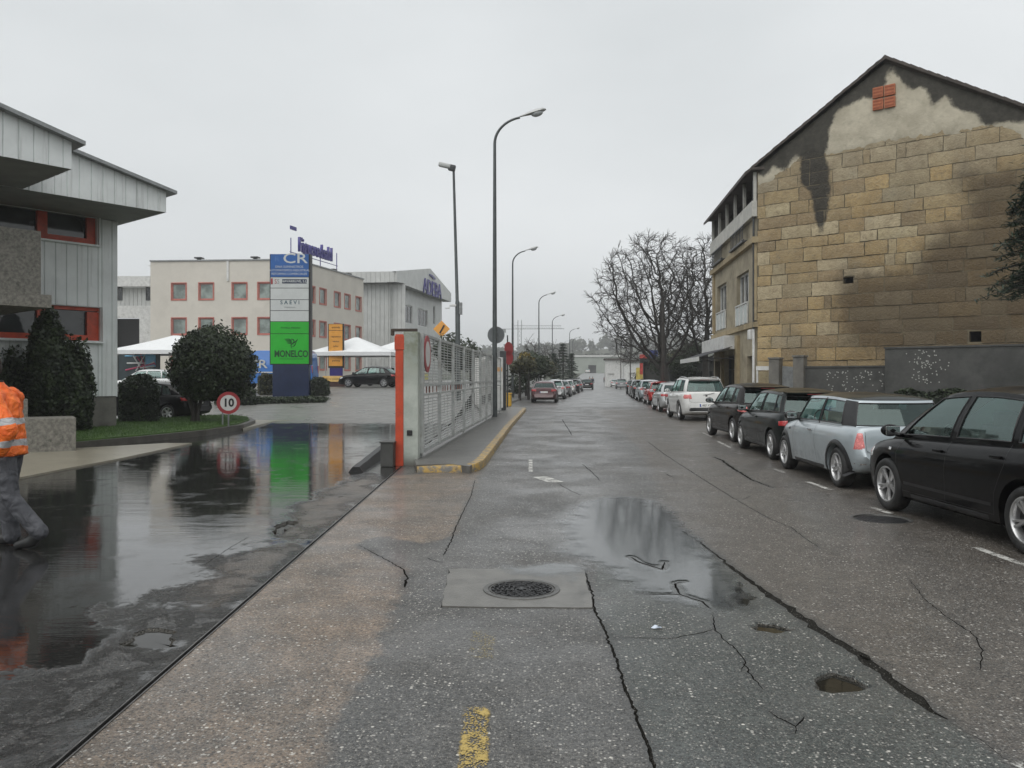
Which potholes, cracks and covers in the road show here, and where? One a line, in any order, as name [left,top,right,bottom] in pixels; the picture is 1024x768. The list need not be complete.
pothole [119,628,177,648]
manhole cover [442,567,592,609]
pothole [272,520,299,535]
pothole [813,669,873,693]
crack [631,444,1011,762]
pothole [749,622,796,633]
